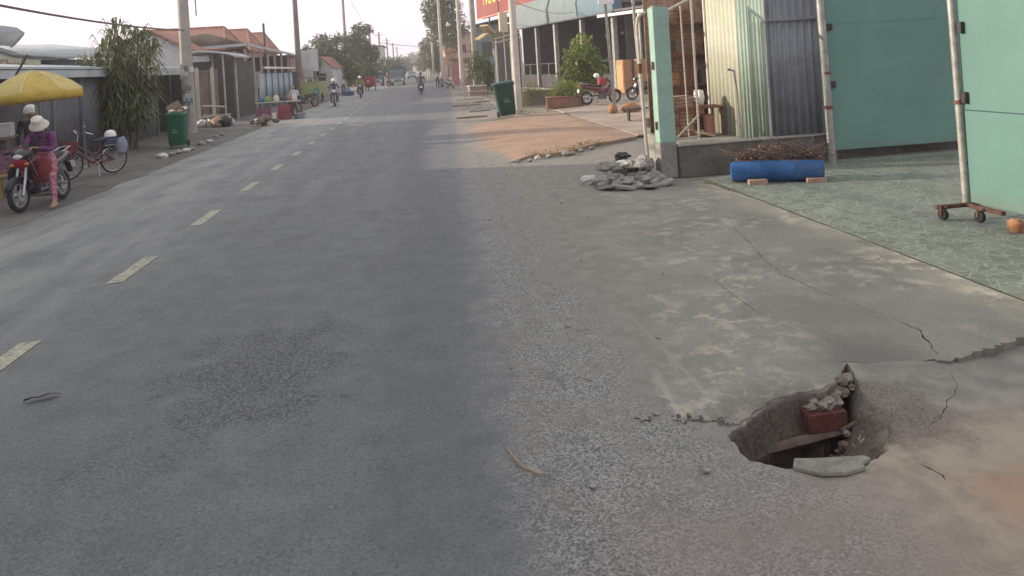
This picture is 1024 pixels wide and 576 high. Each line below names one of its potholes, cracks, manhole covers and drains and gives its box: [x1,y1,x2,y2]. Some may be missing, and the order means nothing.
pothole [728,363,890,469]
crack [716,217,877,313]
